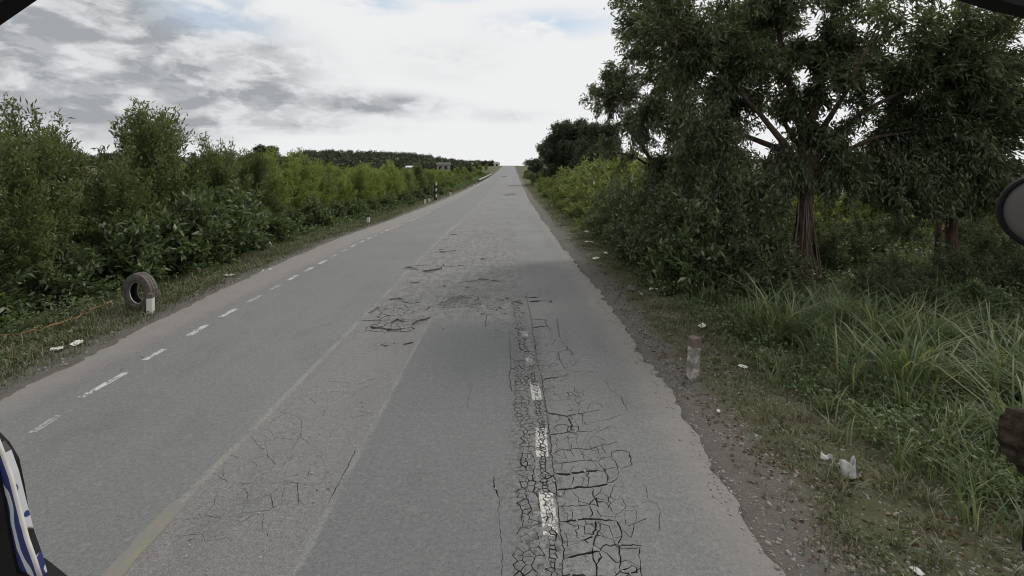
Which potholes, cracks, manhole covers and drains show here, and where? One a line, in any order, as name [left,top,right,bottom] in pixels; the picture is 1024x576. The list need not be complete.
crack [173,379,372,543]
crack [406,249,661,576]
crack [361,301,419,332]
